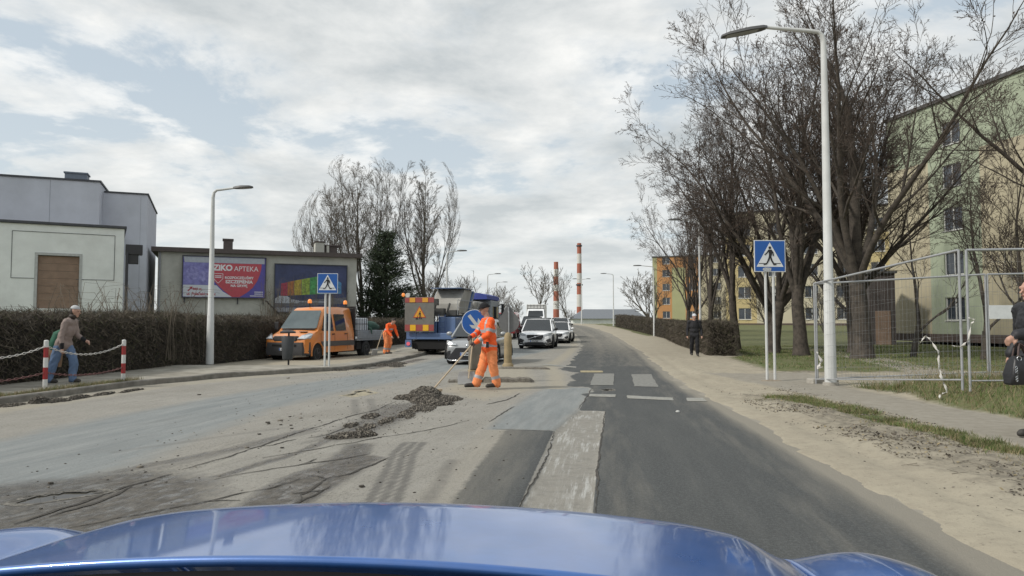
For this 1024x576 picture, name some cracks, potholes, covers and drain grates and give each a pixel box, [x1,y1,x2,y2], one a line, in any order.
crack [15,401,463,528]
